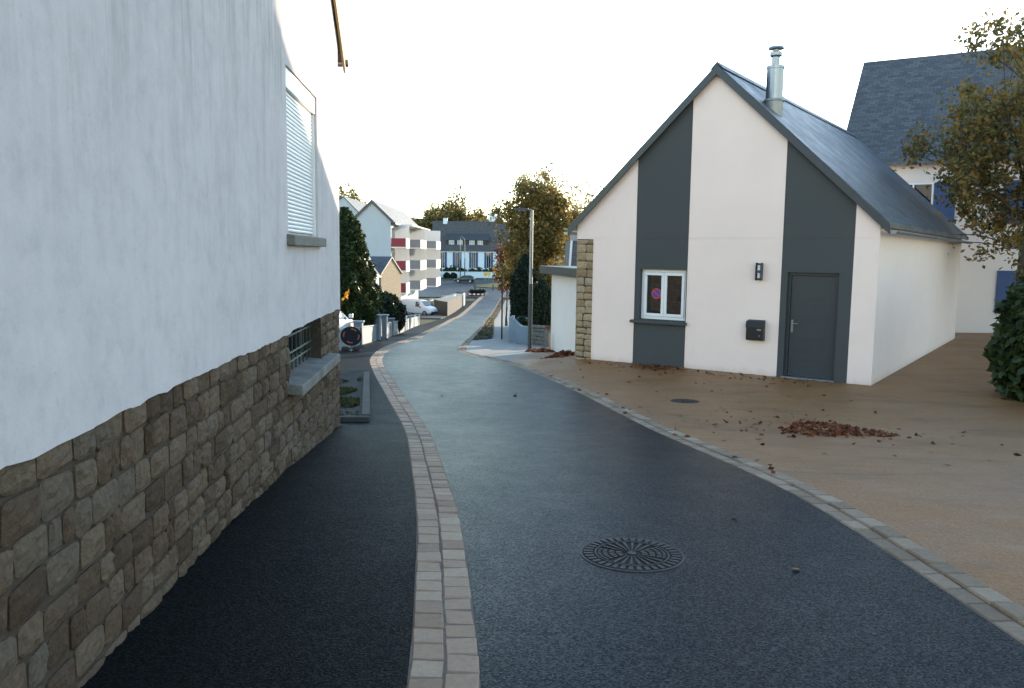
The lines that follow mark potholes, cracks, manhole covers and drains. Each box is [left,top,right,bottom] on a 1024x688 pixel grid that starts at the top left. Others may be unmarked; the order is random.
manhole cover [580,538,685,573]
